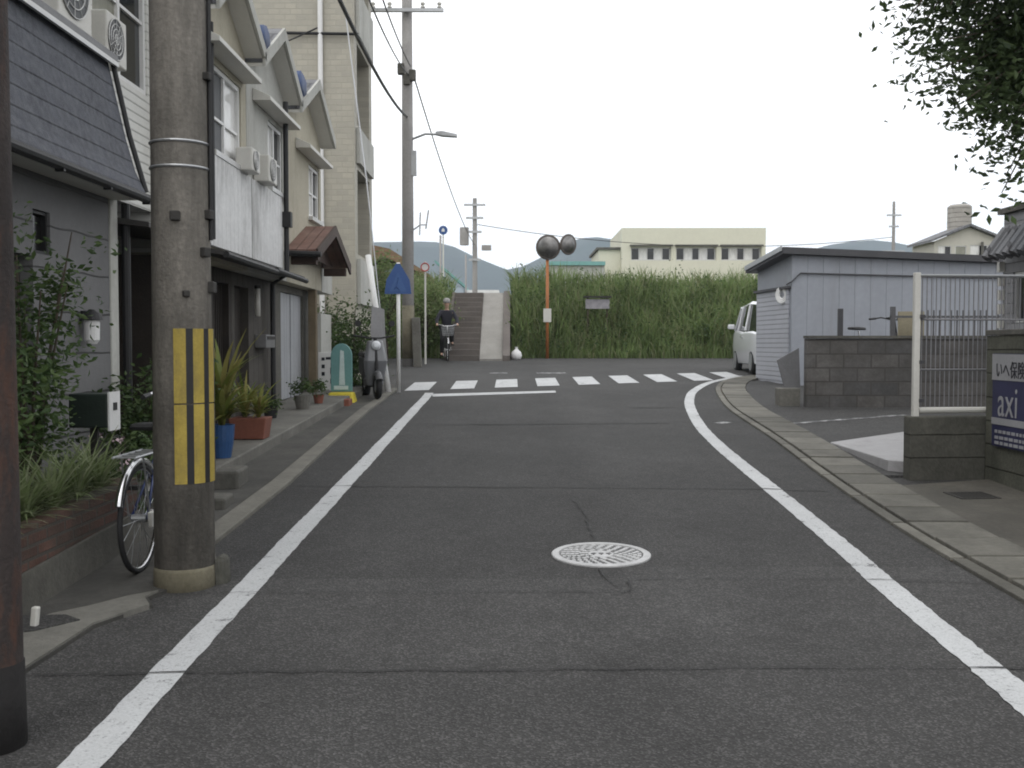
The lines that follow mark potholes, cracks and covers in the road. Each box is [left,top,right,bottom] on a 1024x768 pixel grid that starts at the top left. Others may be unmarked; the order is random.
manhole cover [551,542,651,568]
